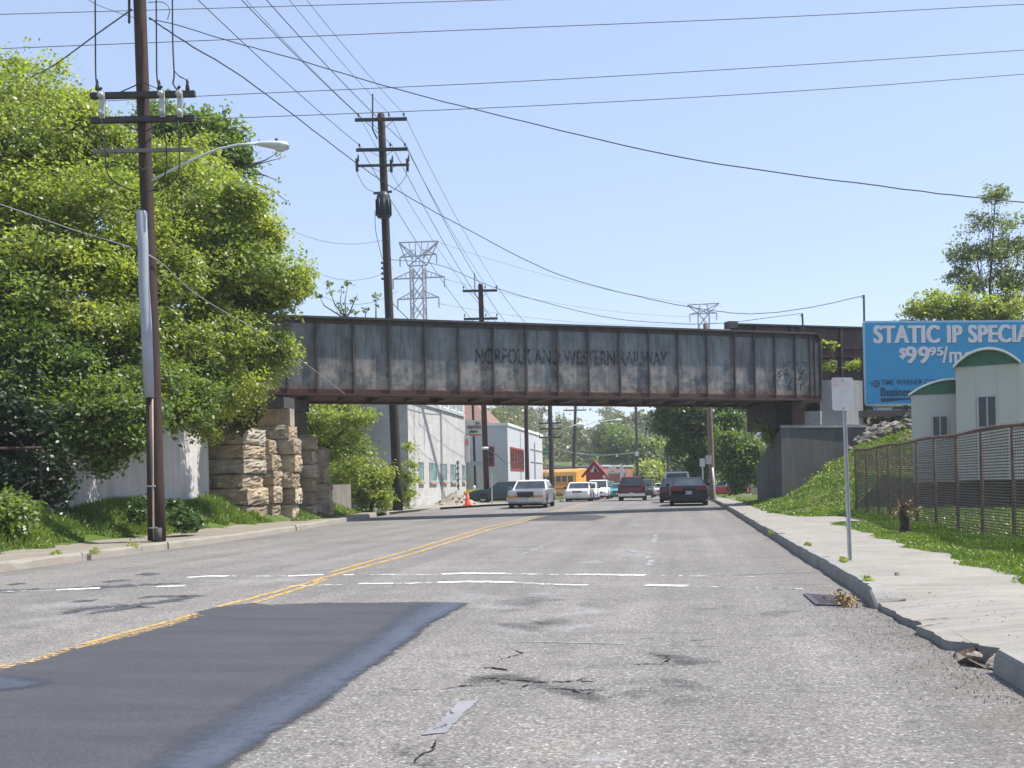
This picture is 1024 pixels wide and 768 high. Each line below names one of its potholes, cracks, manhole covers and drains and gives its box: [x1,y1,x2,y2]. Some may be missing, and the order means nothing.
crack [414,710,454,763]
crack [445,650,616,693]
drain grate [803,593,852,607]
